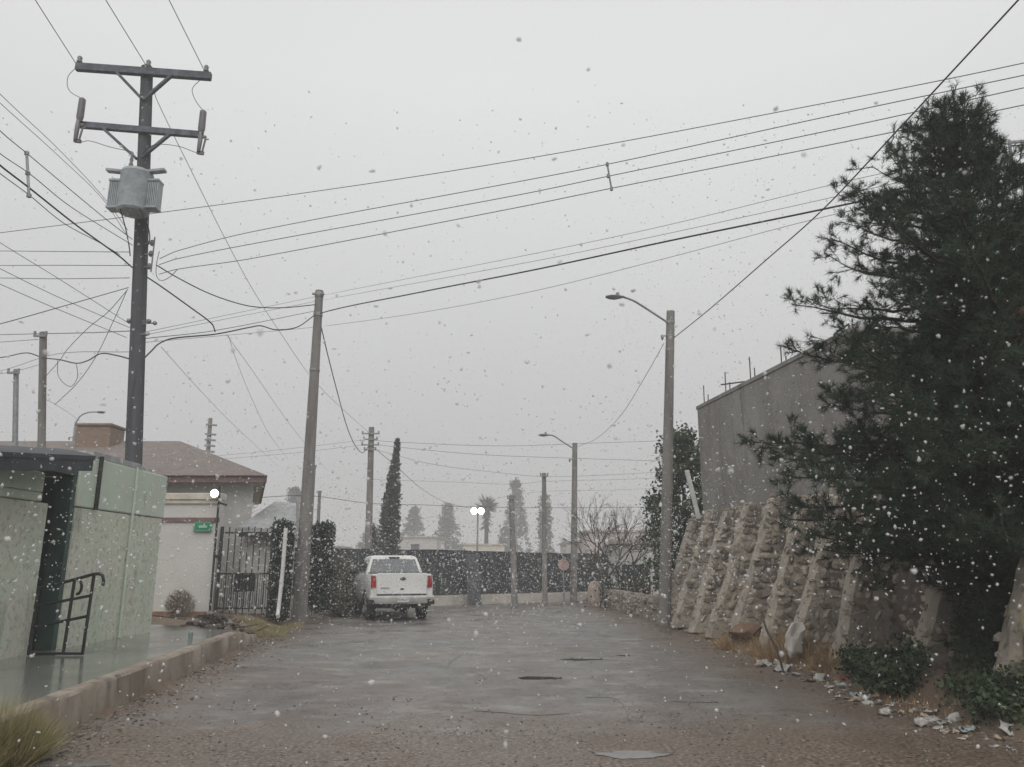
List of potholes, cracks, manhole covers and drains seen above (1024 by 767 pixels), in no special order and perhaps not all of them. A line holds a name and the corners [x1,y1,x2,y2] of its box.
crack [597,696,631,720]
